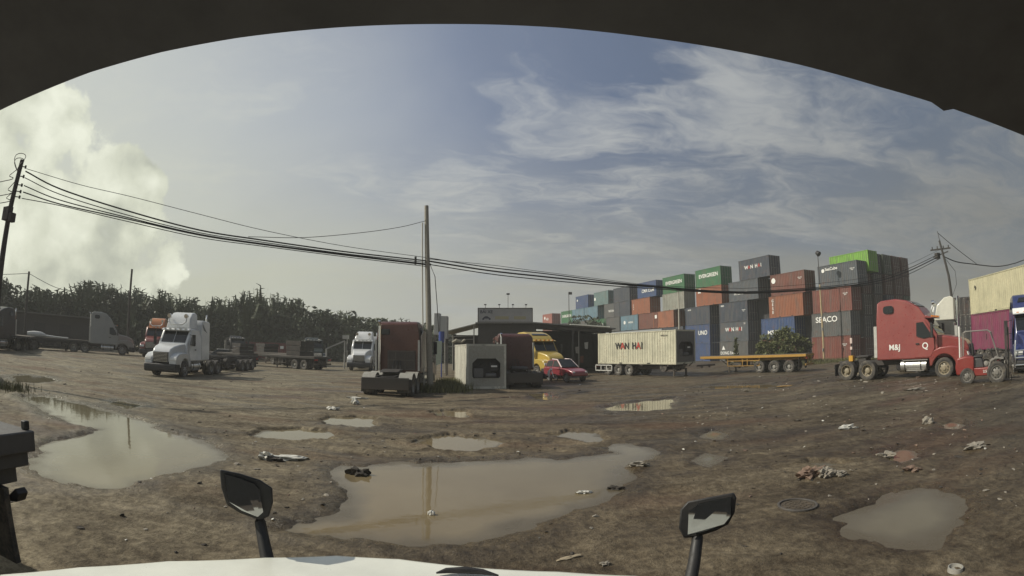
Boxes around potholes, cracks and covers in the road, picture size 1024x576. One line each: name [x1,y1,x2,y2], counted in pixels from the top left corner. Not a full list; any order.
manhole cover [777,498,818,512]
